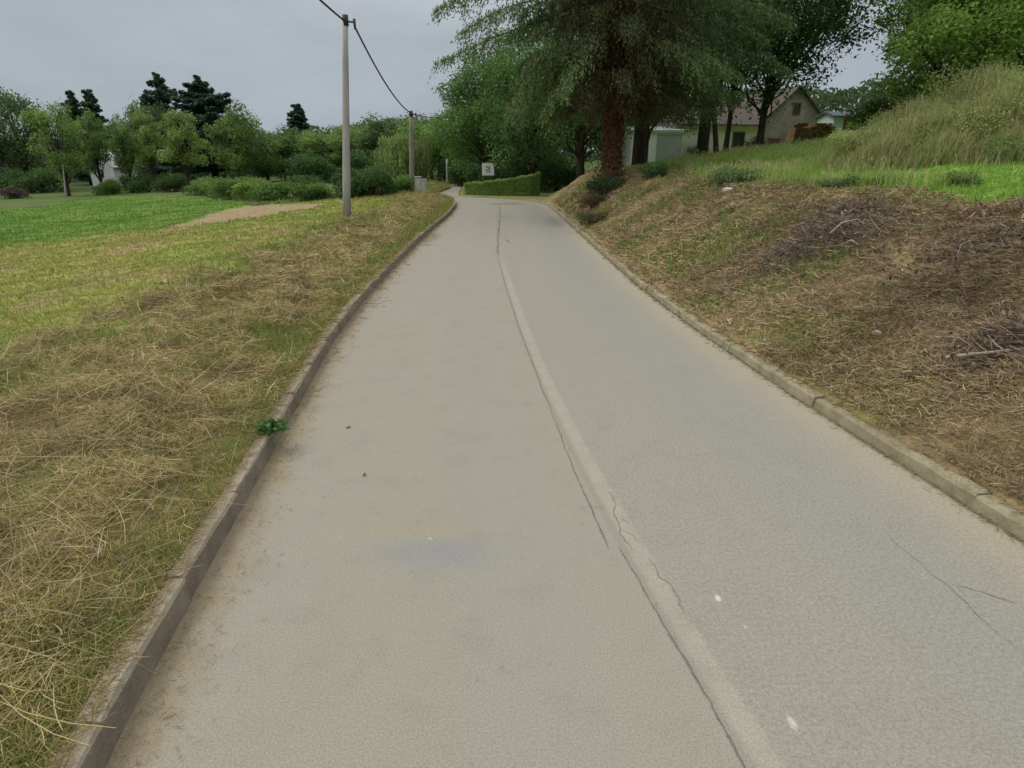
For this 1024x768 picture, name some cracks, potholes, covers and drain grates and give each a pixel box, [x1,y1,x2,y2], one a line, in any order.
crack [652,562,686,615]
crack [891,537,1018,645]
